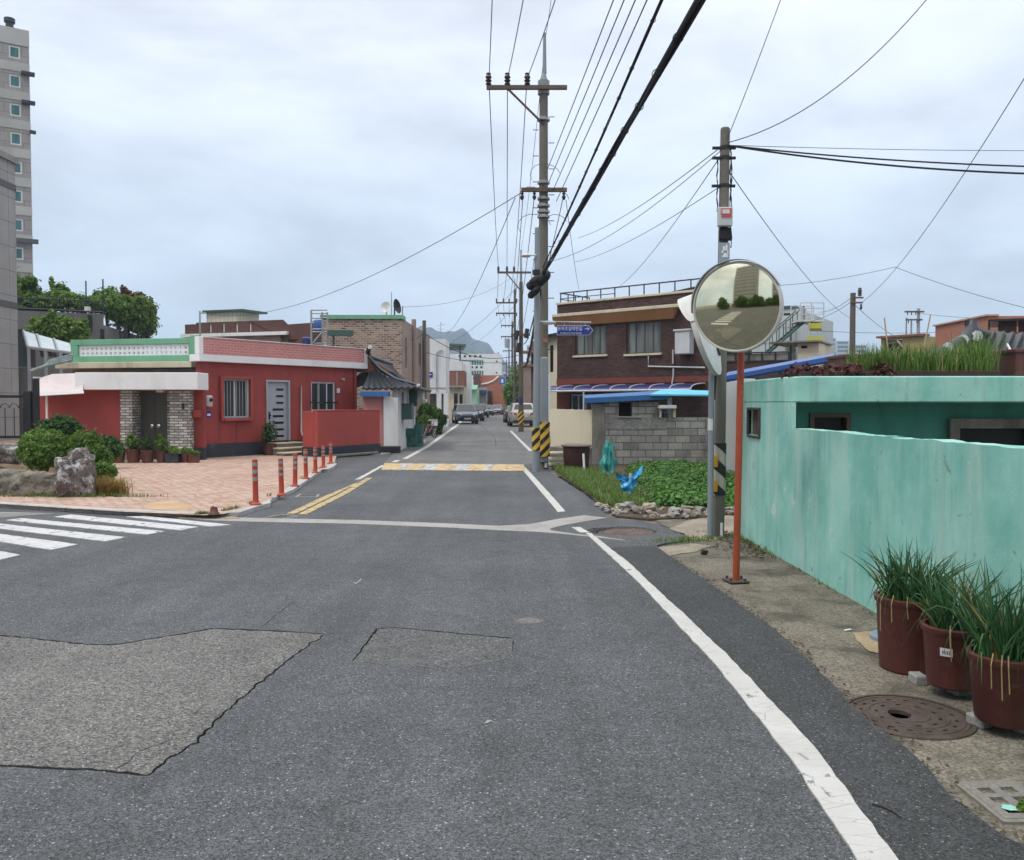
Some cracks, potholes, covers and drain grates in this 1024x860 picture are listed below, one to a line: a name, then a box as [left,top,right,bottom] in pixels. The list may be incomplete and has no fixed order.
manhole cover [586,526,657,535]
drain grate [954,779,1024,825]
crack [0,601,335,776]
manhole cover [847,694,978,741]
